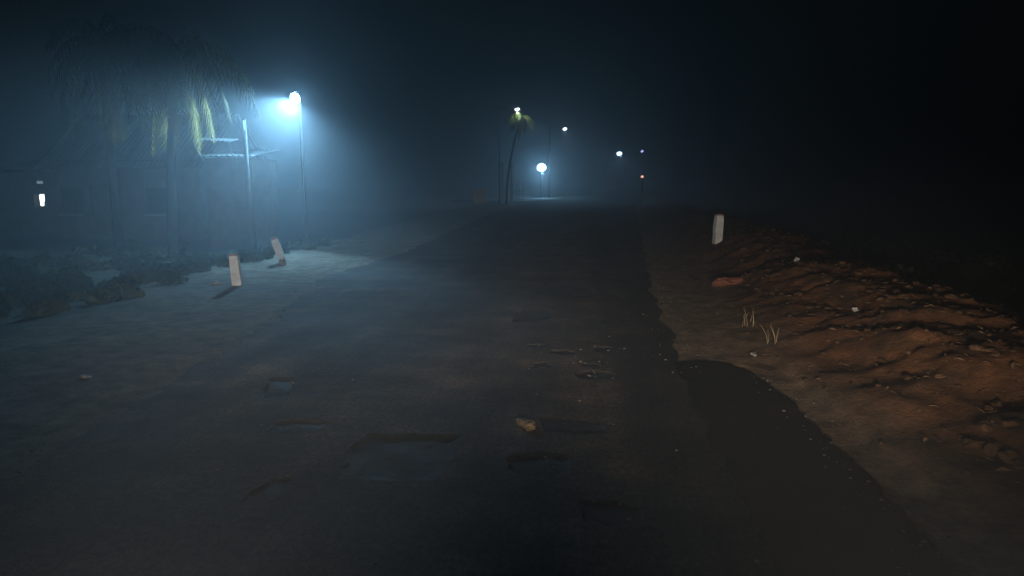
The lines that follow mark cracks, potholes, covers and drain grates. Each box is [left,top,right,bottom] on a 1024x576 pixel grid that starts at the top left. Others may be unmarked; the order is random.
pothole [243,477,292,505]
pothole [578,499,644,527]
pothole [506,451,572,478]
pothole [538,416,611,435]
pothole [574,369,612,380]
pothole [339,433,464,482]
pothole [262,377,296,398]
pothole [266,418,329,435]
pothole [512,308,558,322]
